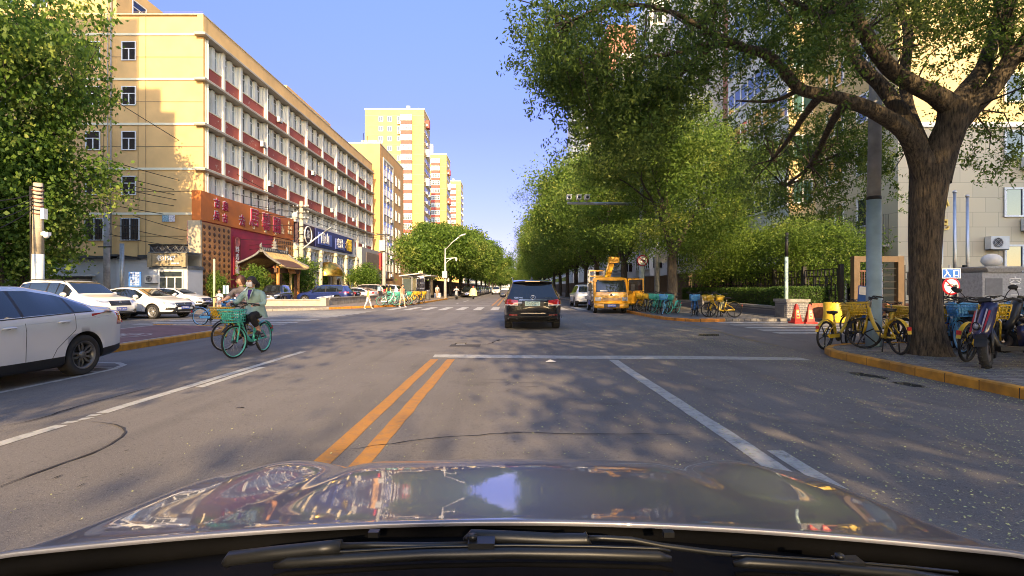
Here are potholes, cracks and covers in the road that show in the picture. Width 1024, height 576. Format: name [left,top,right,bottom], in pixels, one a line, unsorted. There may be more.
crack [344,432,675,450]
